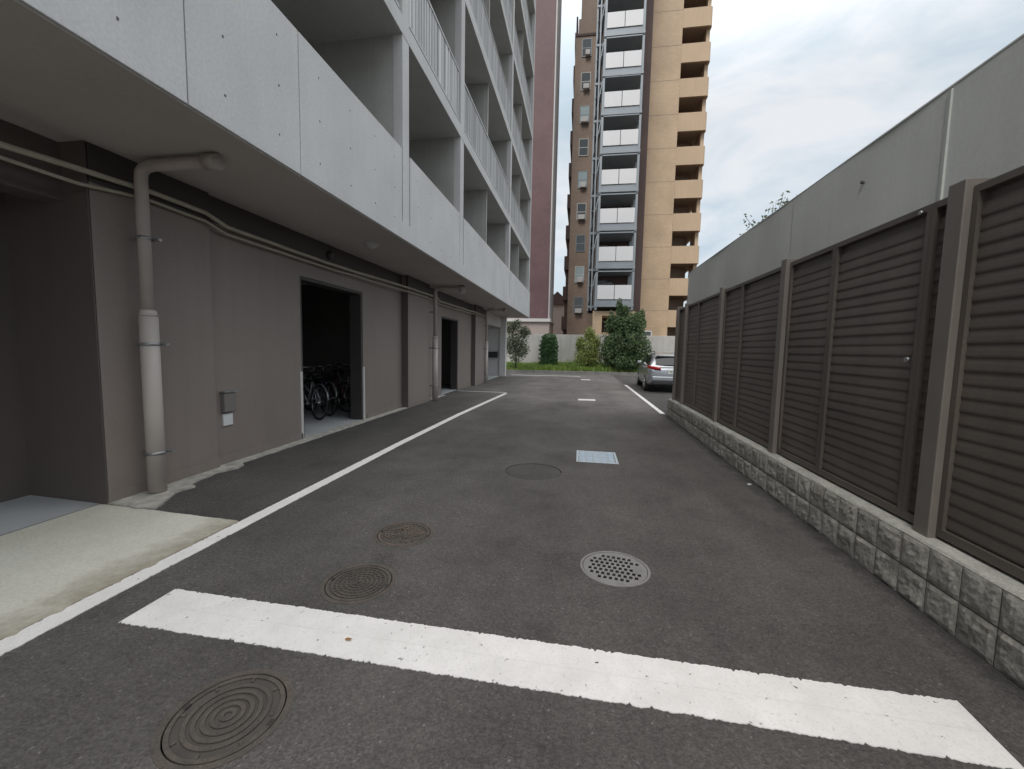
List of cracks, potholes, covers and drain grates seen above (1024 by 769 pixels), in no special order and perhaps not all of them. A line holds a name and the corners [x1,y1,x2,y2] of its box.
manhole cover [374,521,434,548]
drain grate [580,551,651,587]
manhole cover [505,464,561,480]
manhole cover [150,669,294,769]
manhole cover [319,563,397,604]
